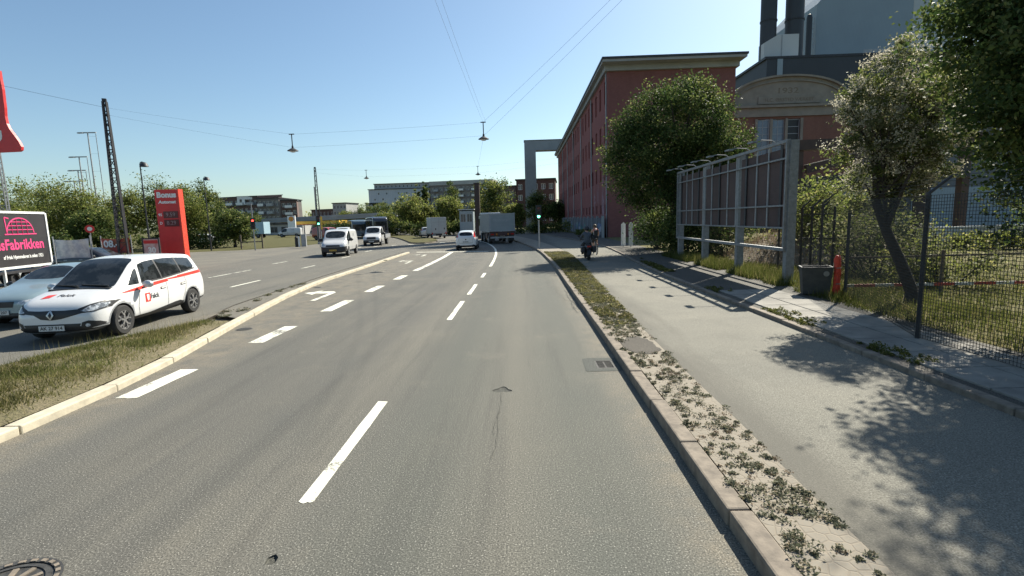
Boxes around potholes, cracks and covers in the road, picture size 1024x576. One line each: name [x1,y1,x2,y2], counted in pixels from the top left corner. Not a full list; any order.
drain grate [594,360,616,368]
manhole cover [0,557,64,576]
